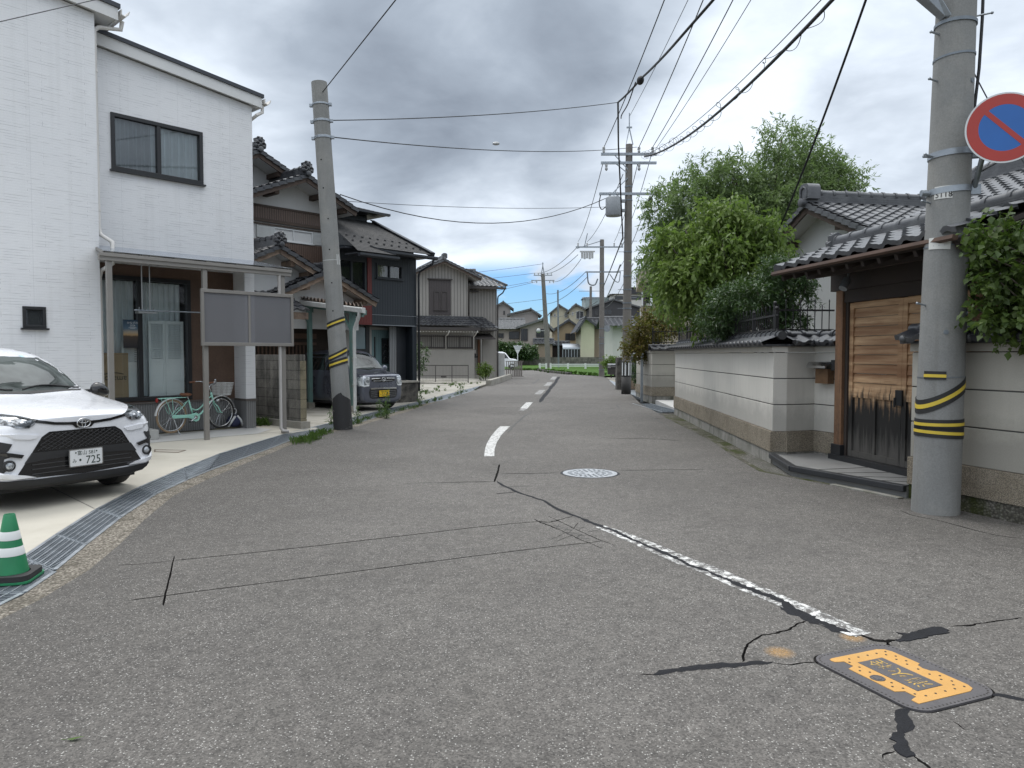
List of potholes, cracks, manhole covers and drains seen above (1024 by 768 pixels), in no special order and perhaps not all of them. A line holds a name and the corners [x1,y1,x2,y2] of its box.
manhole cover [813,644,995,713]
crack [127,464,1018,646]
drain grate [139,468,188,494]
drain grate [209,444,252,470]
manhole cover [560,469,620,478]
drain grate [56,509,122,544]
drain grate [0,559,57,593]
drain grate [239,435,281,459]
drain grate [96,487,157,517]
drain grate [184,454,219,480]
drain grate [26,534,87,571]
